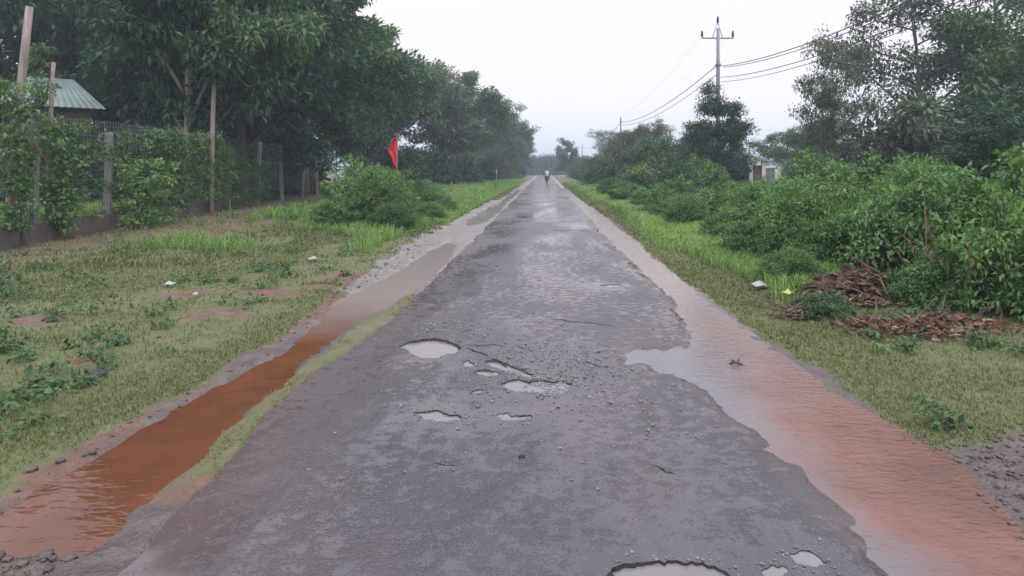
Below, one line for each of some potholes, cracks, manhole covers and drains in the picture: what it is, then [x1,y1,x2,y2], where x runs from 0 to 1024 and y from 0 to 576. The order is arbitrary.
pothole [413,410,464,421]
pothole [398,338,461,358]
pothole [789,550,827,567]
pothole [484,359,533,378]
pothole [607,560,730,576]
pothole [501,378,572,395]
pothole [761,564,788,576]
crack [467,344,535,356]
